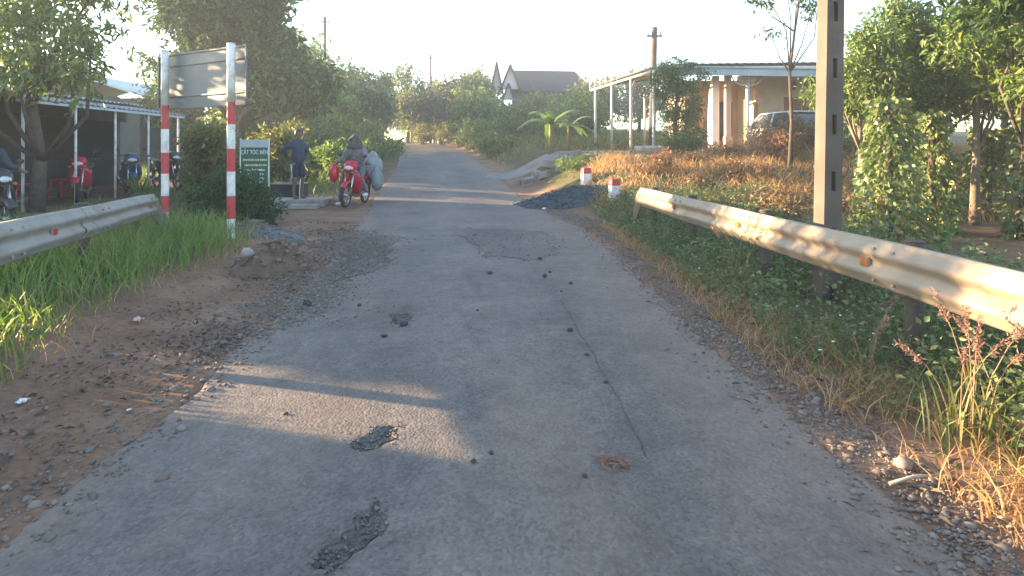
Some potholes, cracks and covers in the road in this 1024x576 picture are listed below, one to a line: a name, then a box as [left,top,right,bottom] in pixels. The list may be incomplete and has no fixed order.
pothole [388,313,414,327]
crack [559,299,645,456]
pothole [343,420,402,456]
pothole [297,496,403,574]
